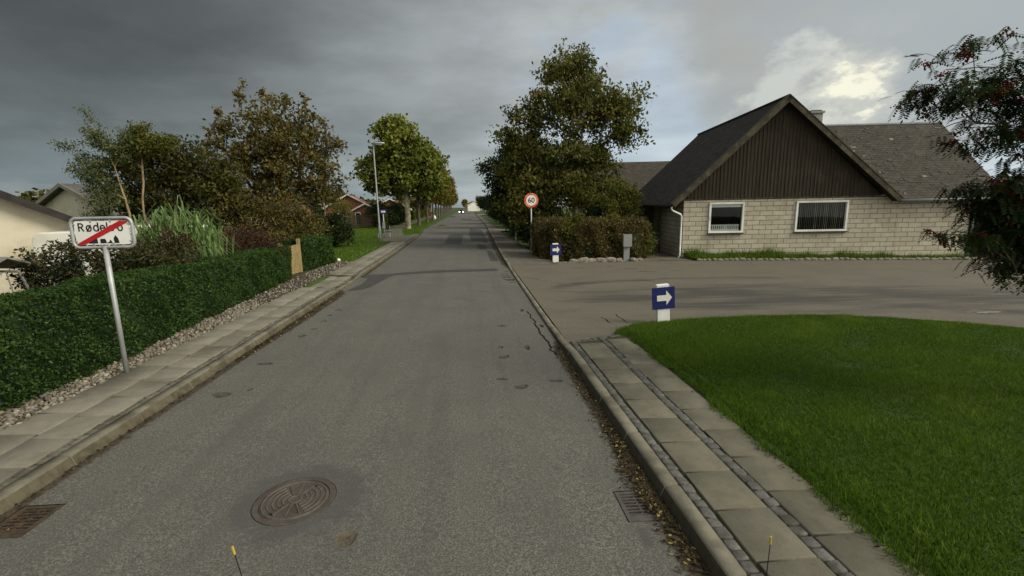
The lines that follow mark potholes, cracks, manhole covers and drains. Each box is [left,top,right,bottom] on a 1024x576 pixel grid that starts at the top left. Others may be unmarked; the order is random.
manhole cover [251,477,336,526]
drain grate [614,491,664,522]
drain grate [0,504,65,539]
crack [527,312,558,356]
